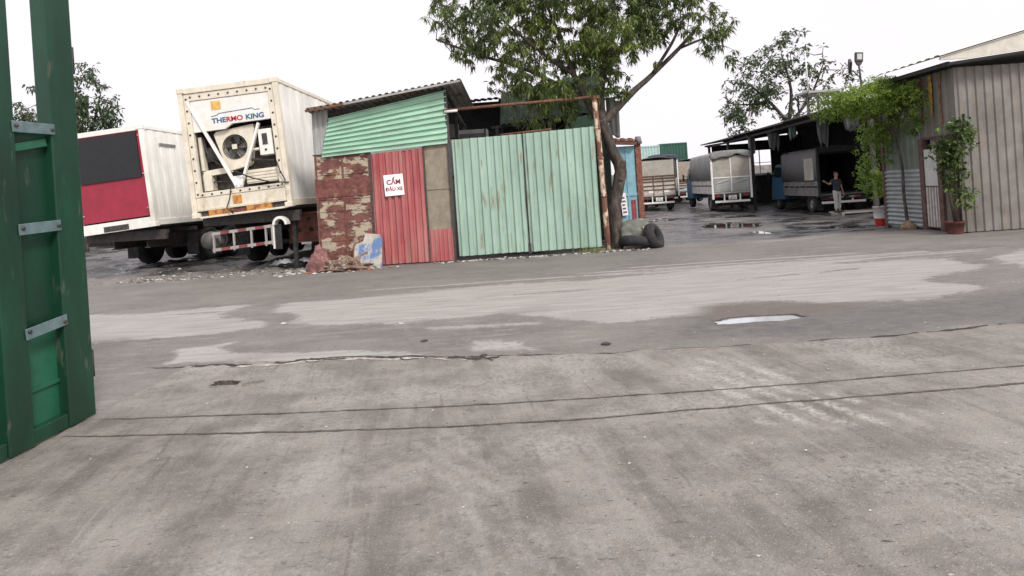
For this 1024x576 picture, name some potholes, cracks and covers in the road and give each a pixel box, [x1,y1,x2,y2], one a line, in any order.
pothole [700,313,821,326]
crack [146,354,562,368]
